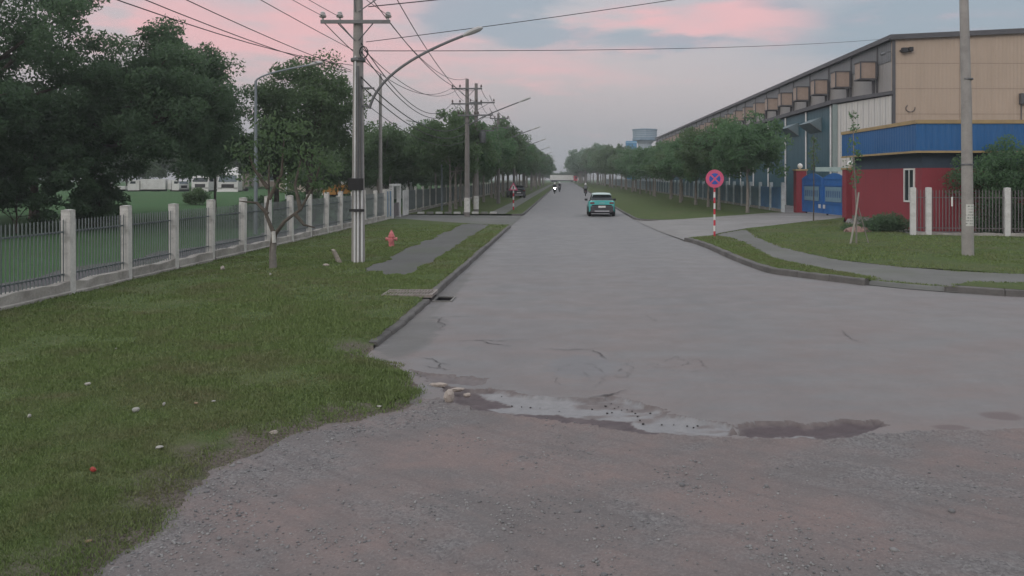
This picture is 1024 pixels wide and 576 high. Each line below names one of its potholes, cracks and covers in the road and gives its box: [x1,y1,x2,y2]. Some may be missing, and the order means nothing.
drain grate [381,289,438,298]
crack [553,348,634,397]
pothole [442,386,738,437]
pothole [735,419,890,440]
